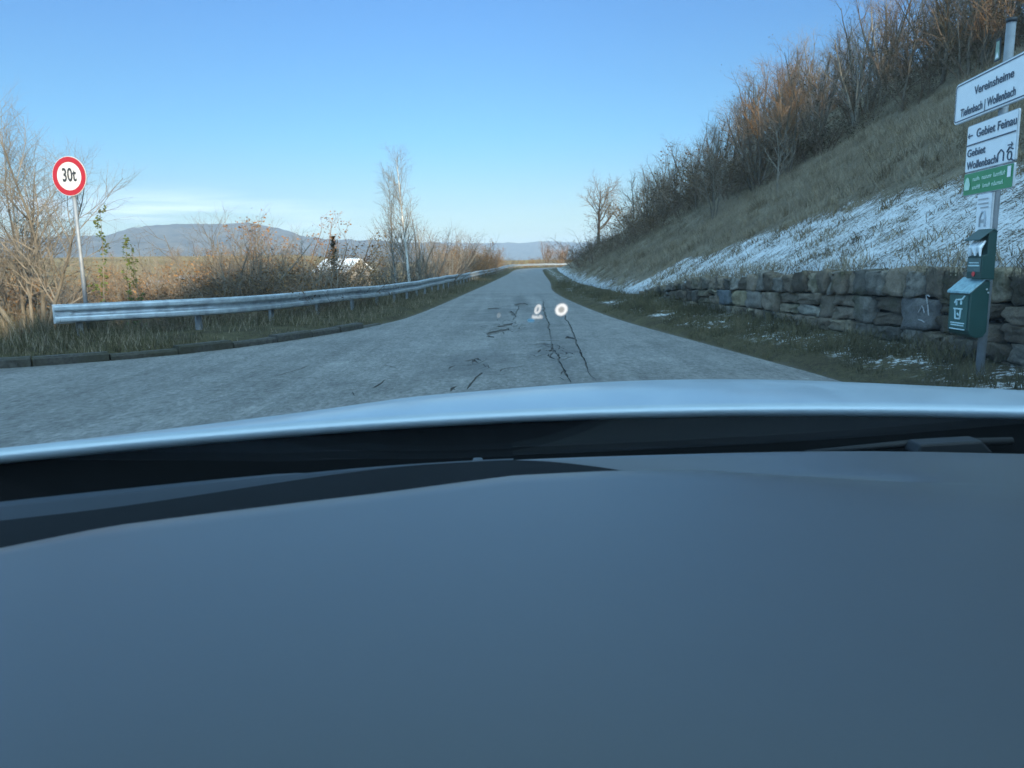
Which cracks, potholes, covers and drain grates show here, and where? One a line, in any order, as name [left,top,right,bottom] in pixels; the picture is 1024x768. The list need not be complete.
crack [449,302,596,392]
